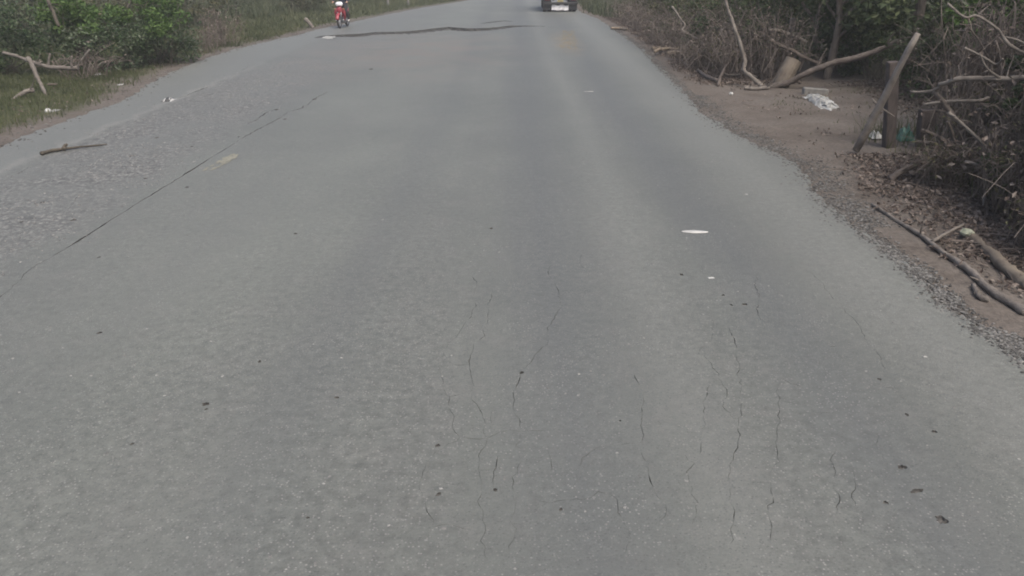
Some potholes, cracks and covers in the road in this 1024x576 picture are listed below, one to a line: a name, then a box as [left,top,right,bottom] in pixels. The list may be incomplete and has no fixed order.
crack [419,272,561,559]
crack [830,451,856,522]
crack [546,375,667,549]
crack [699,326,742,544]
